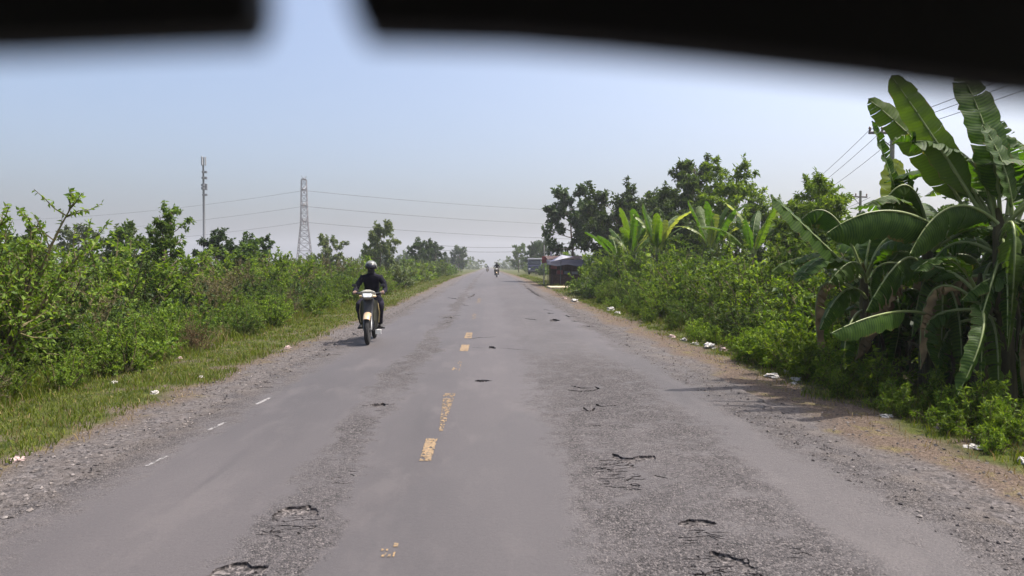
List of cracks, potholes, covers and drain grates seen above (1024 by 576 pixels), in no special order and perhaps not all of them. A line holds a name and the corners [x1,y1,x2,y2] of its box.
pothole [272,505,319,521]
crack [594,460,668,490]
crack [570,386,616,426]
crack [679,530,762,576]
pothole [208,562,269,576]
